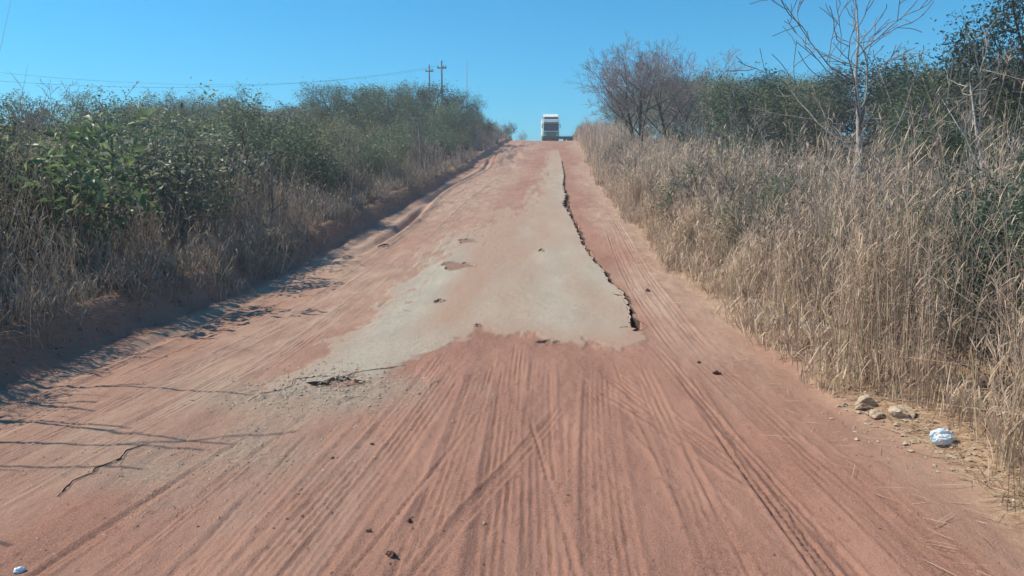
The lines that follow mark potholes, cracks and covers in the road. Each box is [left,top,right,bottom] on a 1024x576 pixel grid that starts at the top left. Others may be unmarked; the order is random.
pothole [303,376,372,389]
crack [559,161,648,331]
crack [57,443,151,496]
pothole [439,261,477,271]
